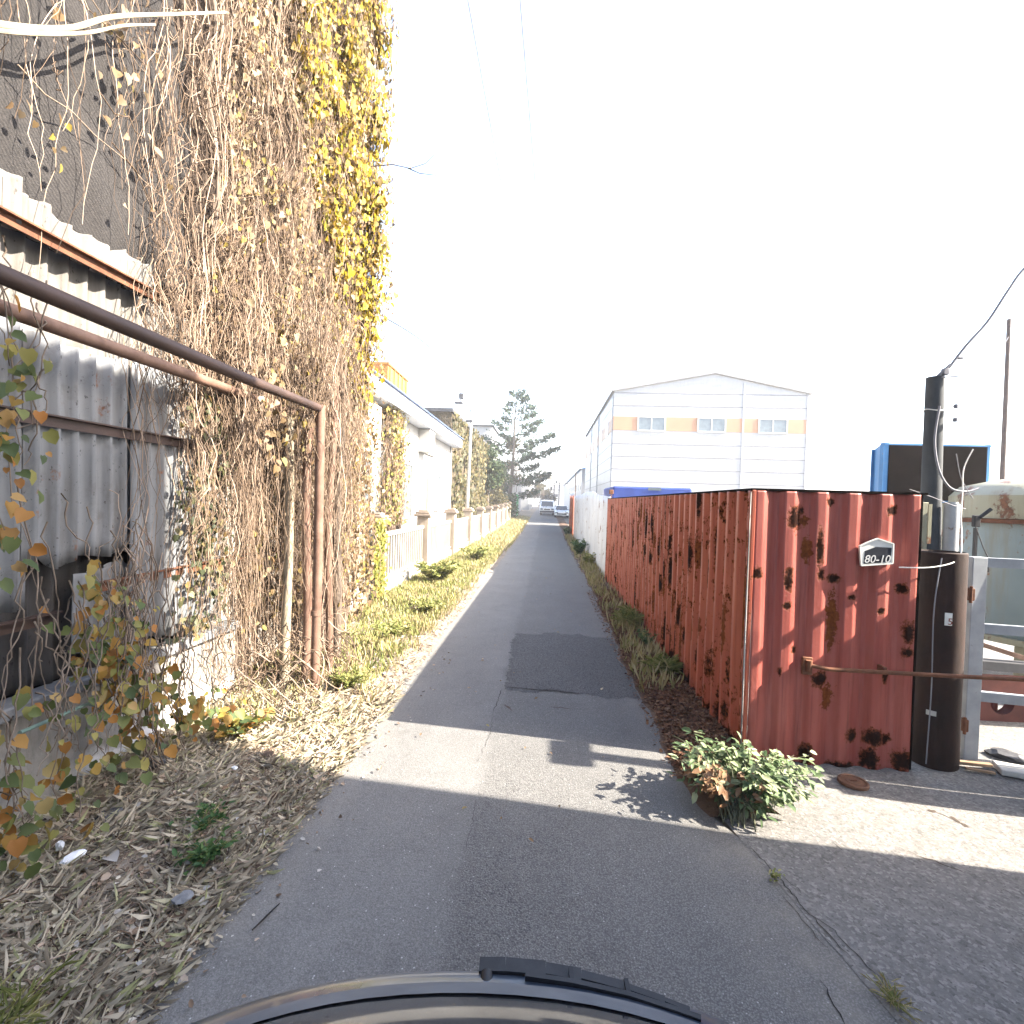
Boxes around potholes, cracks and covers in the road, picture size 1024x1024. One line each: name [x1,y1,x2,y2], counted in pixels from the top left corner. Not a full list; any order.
crack [753,850,888,1024]
crack [464,686,574,853]
manhole cover [837,773,870,791]
